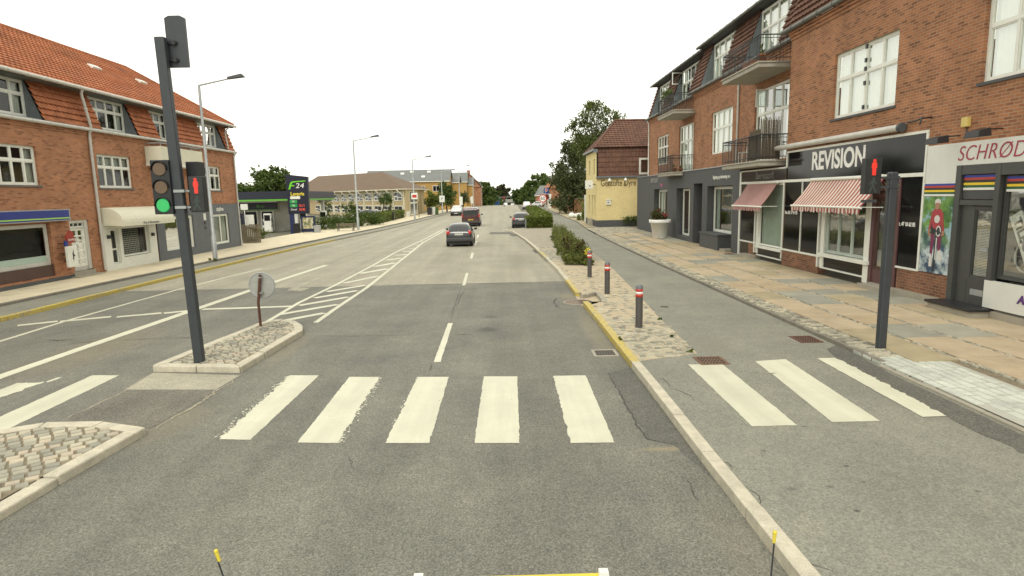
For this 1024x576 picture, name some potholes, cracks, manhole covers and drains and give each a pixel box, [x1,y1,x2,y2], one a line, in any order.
crack [610,378,685,445]
drain grate [693,356,731,365]
drain grate [591,349,619,357]
